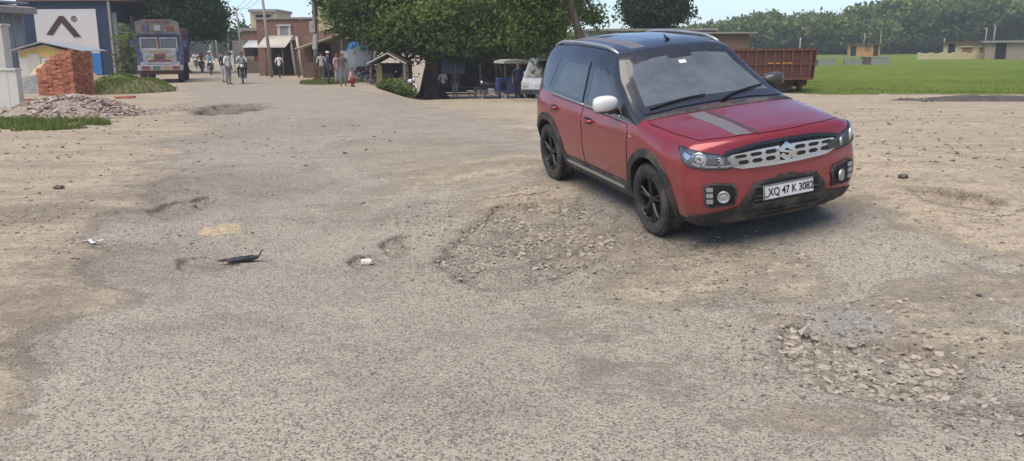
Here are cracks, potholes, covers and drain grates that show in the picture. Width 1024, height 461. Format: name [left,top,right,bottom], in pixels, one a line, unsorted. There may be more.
pothole [889,181,1024,216]
pothole [161,102,296,118]
pothole [415,196,638,297]
pothole [335,252,398,272]
pothole [135,194,230,220]
pothole [369,231,421,261]
pothole [749,318,1002,416]
pothole [164,254,254,275]
